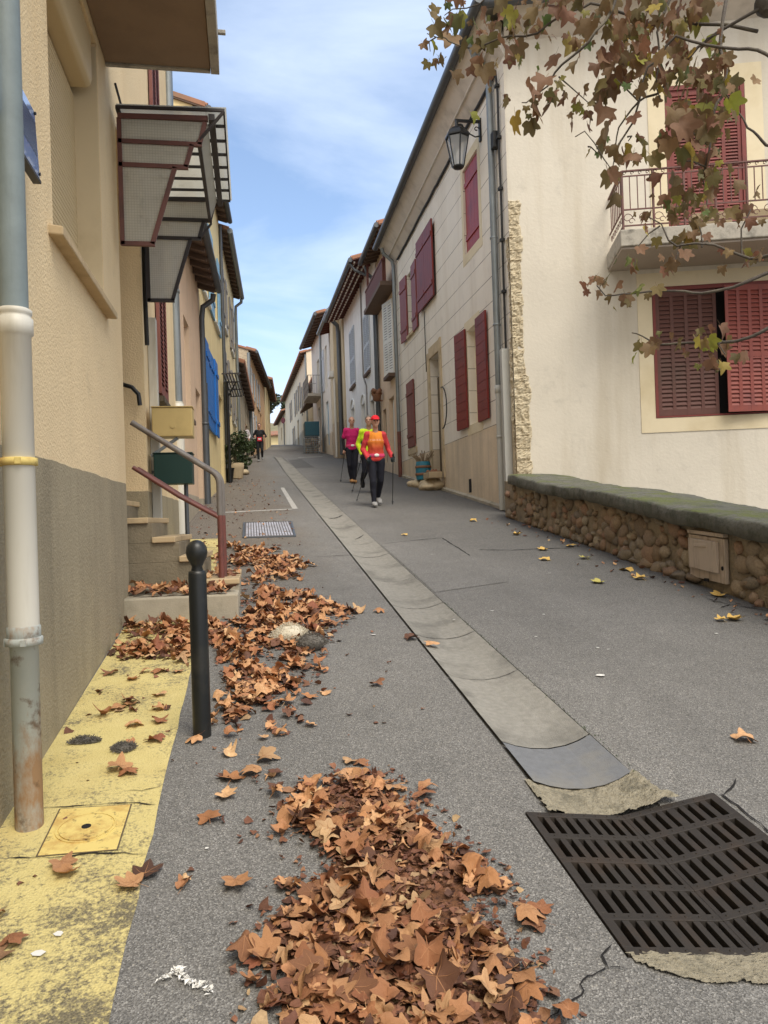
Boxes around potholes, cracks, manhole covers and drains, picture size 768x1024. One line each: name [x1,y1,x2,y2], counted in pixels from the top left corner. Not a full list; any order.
crack [541,944,627,1023]
drain grate [526,793,768,958]
crack [720,779,768,832]
manhole cover [36,804,132,857]
